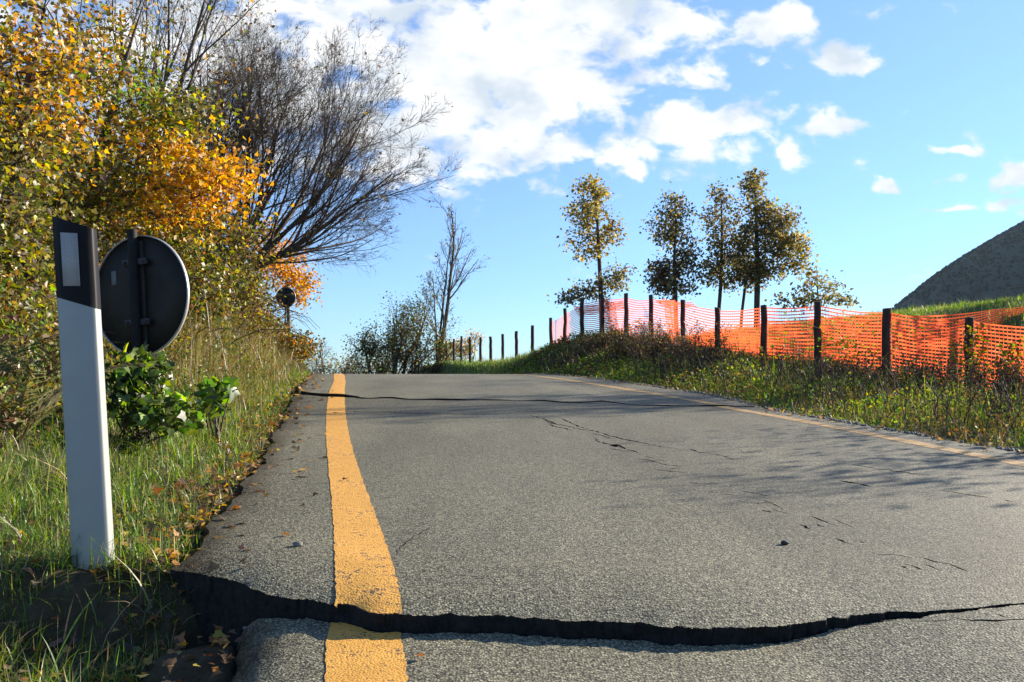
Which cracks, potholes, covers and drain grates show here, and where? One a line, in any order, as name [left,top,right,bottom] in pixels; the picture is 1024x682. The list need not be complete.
crack [169,516,1024,651]
crack [840,464,1013,502]
crack [301,391,788,514]
